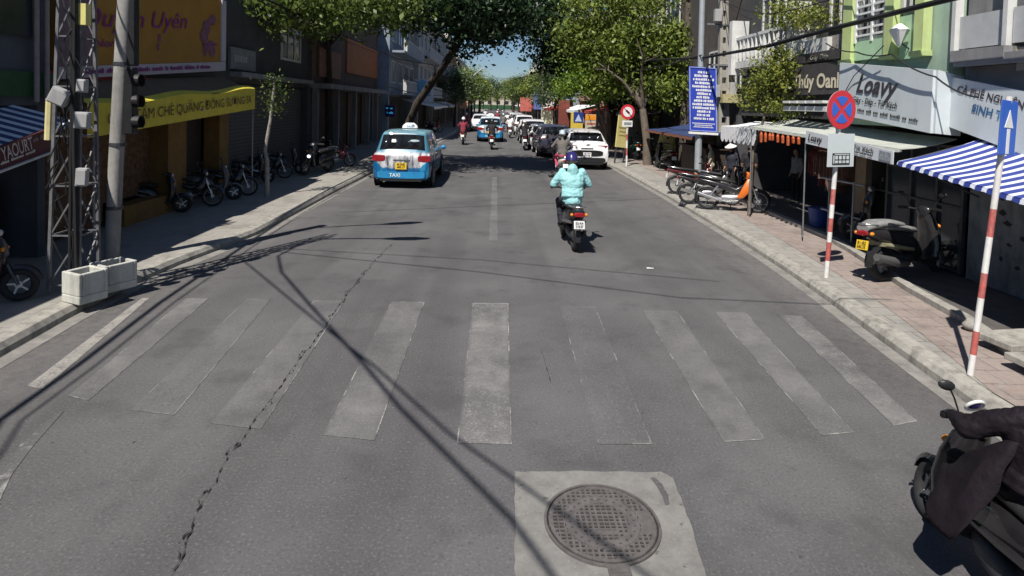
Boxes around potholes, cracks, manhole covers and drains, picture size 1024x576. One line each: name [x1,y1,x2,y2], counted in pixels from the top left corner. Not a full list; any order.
crack [172,245,391,574]
manhole cover [544,484,662,576]
